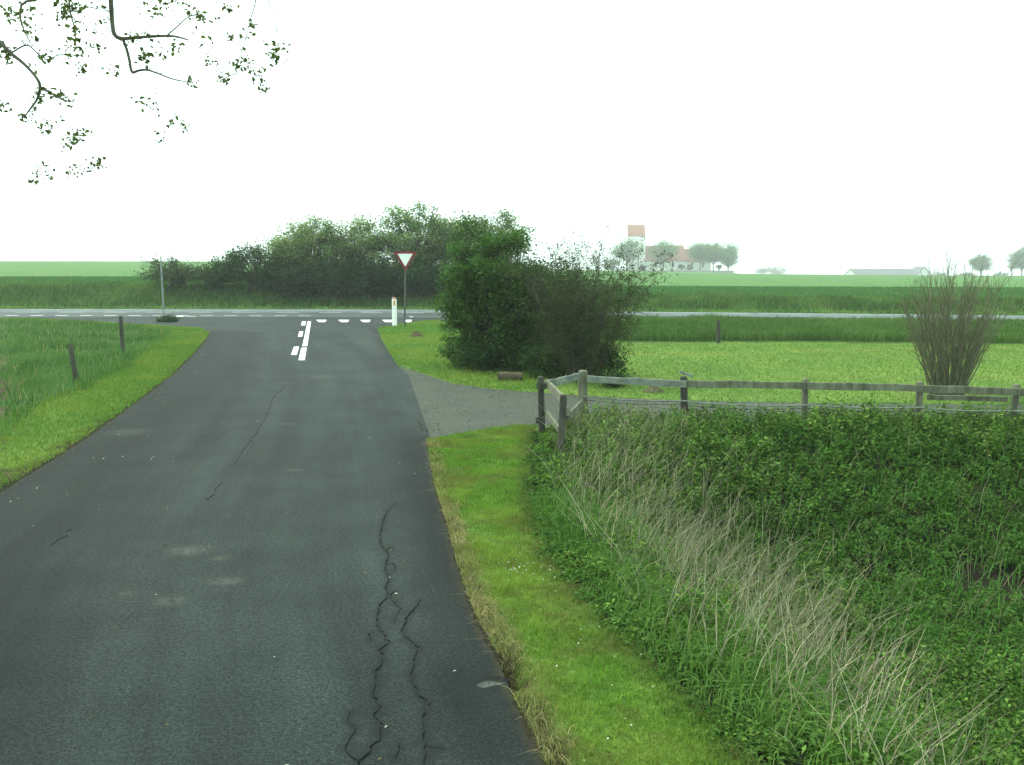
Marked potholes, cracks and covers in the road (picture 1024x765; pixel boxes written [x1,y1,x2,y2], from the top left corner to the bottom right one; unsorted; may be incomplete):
crack [345,503,443,765]
